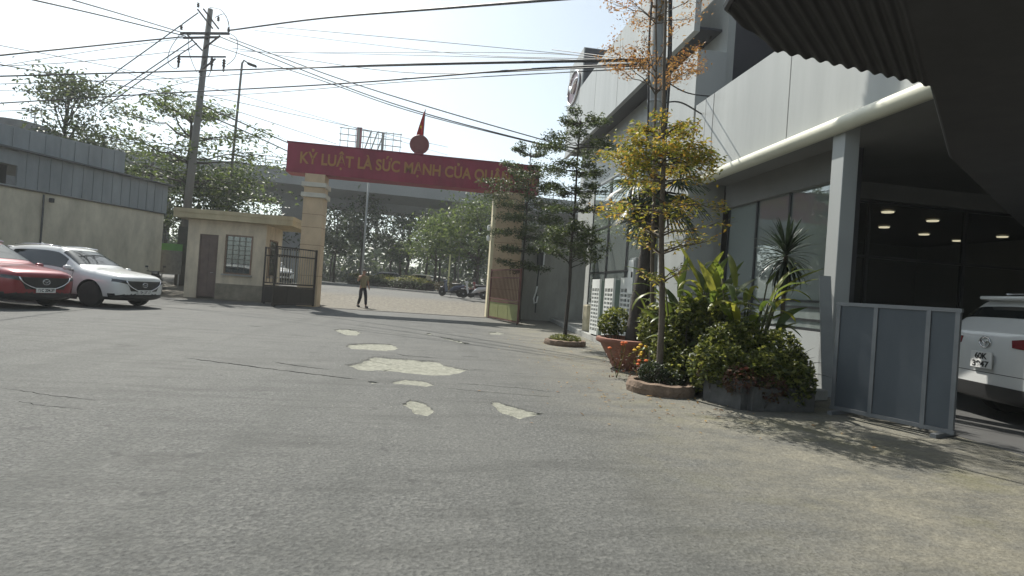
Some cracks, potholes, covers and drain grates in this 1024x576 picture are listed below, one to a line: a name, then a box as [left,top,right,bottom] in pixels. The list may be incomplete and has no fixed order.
crack [13,389,90,409]
crack [190,358,352,379]
